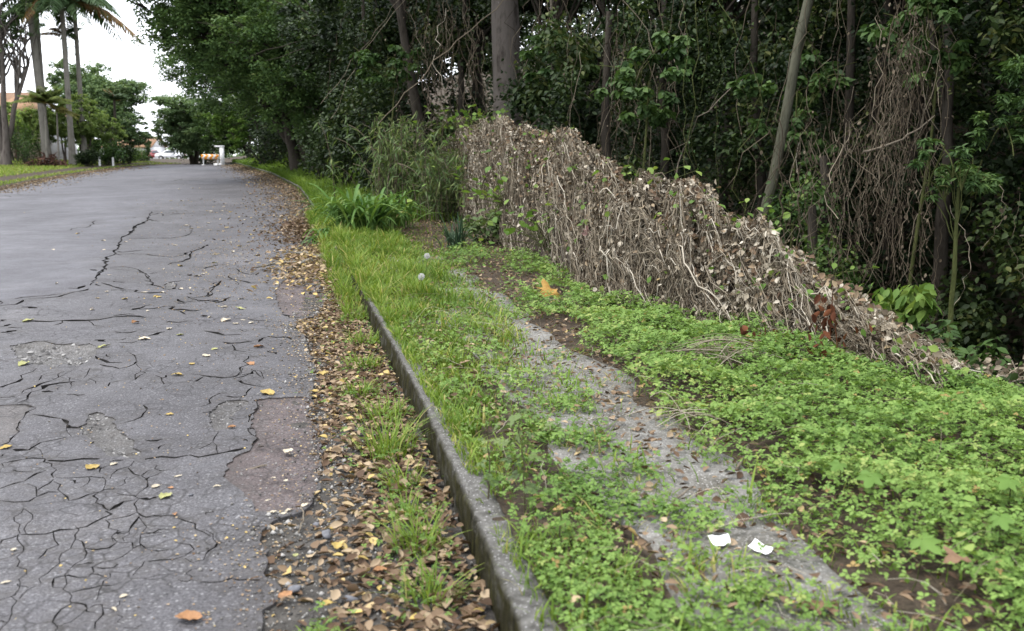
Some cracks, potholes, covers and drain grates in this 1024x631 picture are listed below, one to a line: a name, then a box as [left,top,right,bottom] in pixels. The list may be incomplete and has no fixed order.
pothole [78,412,141,458]
pothole [10,341,98,367]
crack [0,212,308,631]
